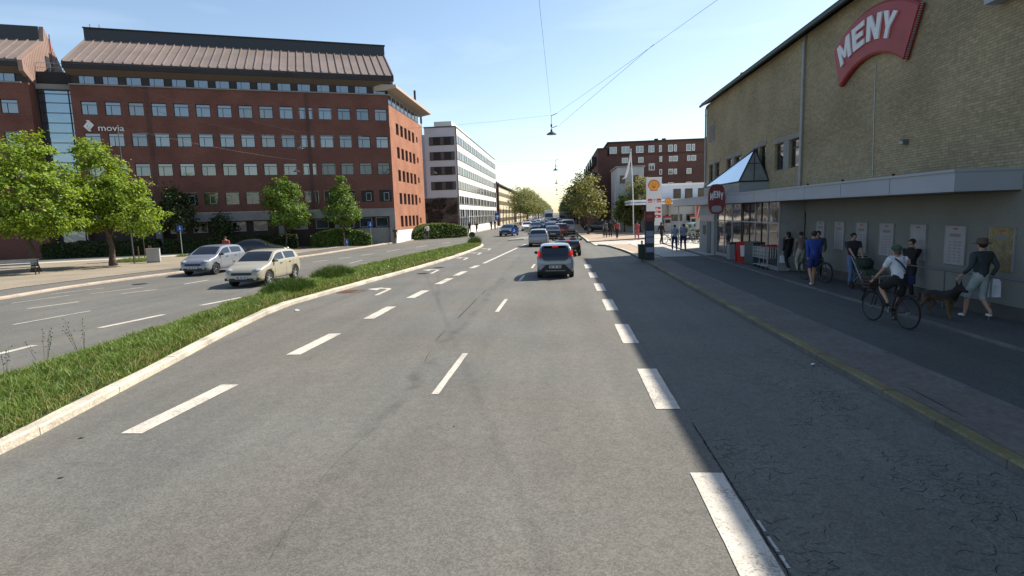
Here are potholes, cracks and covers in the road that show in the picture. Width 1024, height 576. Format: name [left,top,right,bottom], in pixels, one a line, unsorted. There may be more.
crack [704,346,1024,574]
